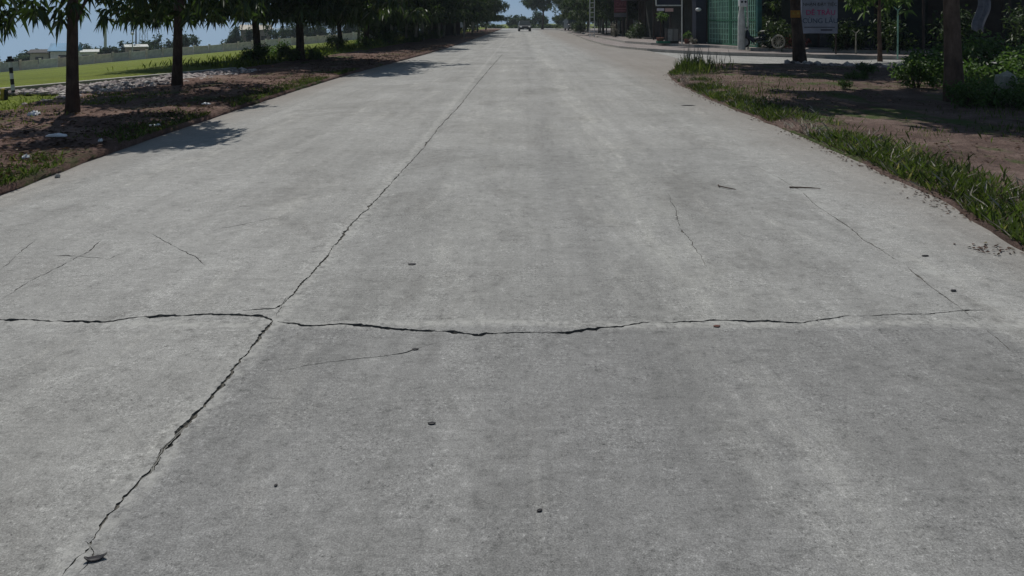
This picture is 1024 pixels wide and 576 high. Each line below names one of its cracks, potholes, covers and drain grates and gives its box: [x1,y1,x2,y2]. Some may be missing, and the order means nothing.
crack [668,194,707,267]
crack [0,298,970,370]
crack [5,241,114,297]
